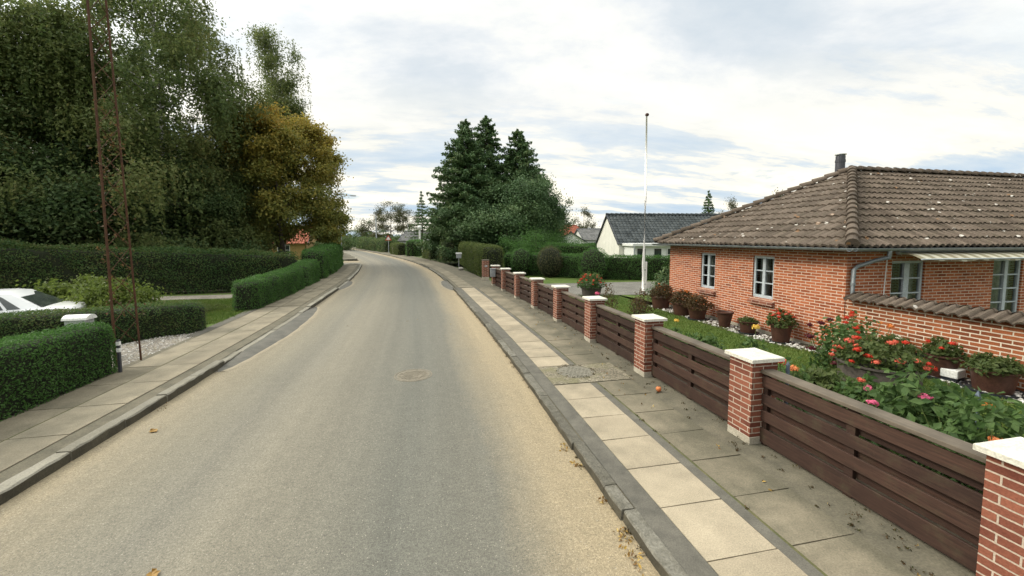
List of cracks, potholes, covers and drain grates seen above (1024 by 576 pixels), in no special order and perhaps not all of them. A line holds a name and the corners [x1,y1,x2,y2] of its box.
manhole cover [394,369,432,382]
manhole cover [557,365,594,378]
